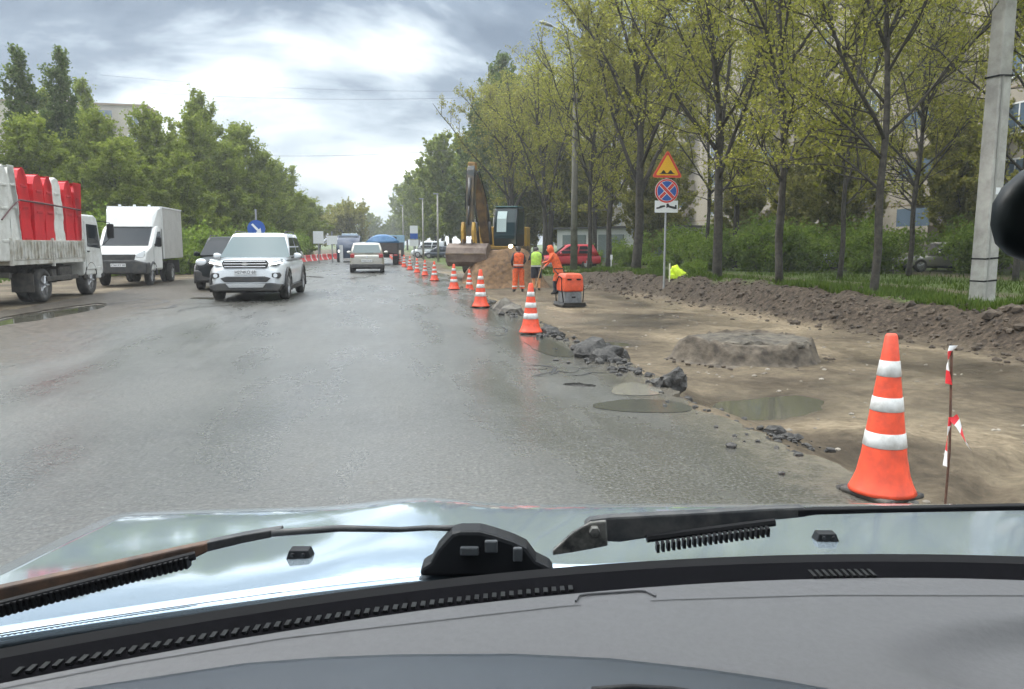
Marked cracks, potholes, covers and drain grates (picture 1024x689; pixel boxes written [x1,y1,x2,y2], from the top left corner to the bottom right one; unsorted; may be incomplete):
pothole [0,304,105,326]
crack [532,365,612,376]
